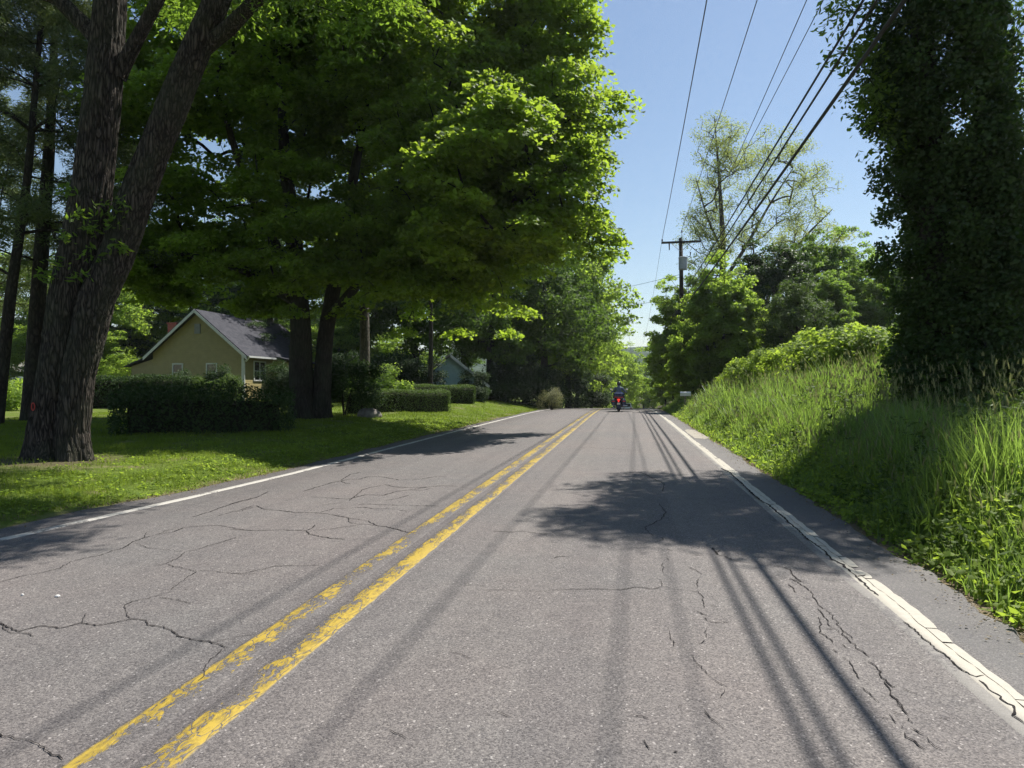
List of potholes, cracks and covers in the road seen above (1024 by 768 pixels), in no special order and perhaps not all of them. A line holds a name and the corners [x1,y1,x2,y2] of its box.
crack [0,733,63,759]
crack [774,565,947,750]
crack [0,571,250,680]
crack [482,472,727,727]
crack [4,472,444,581]
crack [721,468,1023,722]
